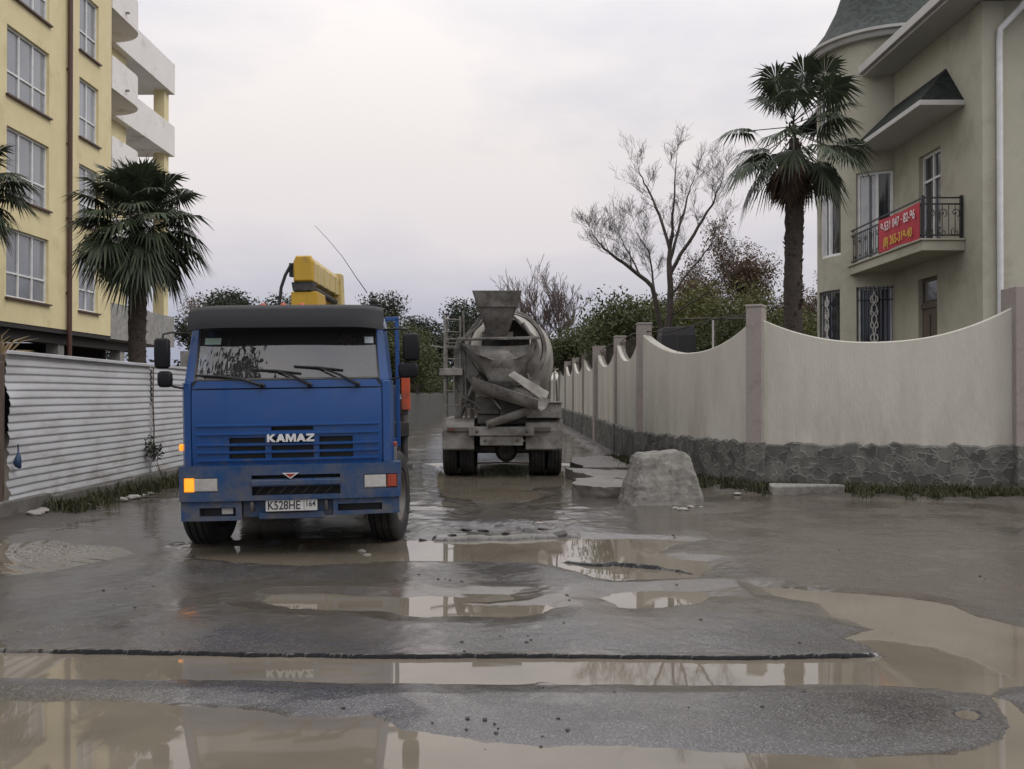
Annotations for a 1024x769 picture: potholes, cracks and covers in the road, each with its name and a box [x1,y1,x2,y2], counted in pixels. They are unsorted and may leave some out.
pothole [175,534,718,581]
crack [561,561,703,577]
pothole [0,696,1024,769]
pothole [0,586,1024,696]
